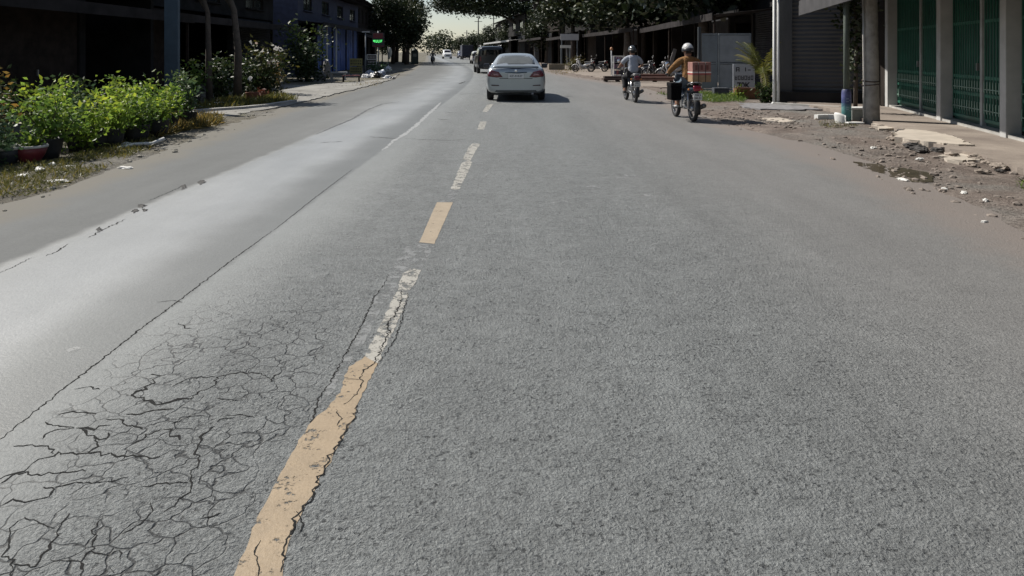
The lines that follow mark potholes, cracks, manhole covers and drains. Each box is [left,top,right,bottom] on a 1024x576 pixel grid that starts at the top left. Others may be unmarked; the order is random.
crack [0,372,282,576]
